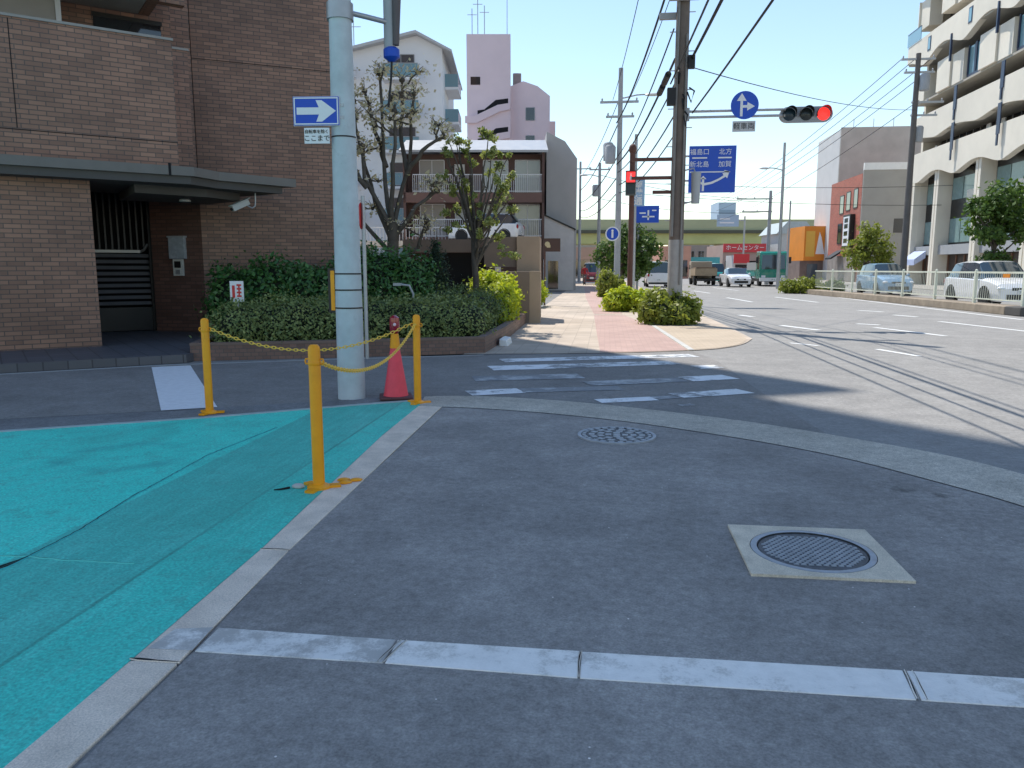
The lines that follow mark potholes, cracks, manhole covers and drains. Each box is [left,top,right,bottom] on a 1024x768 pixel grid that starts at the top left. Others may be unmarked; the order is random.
manhole cover [578,427,656,445]
manhole cover [728,524,916,584]
